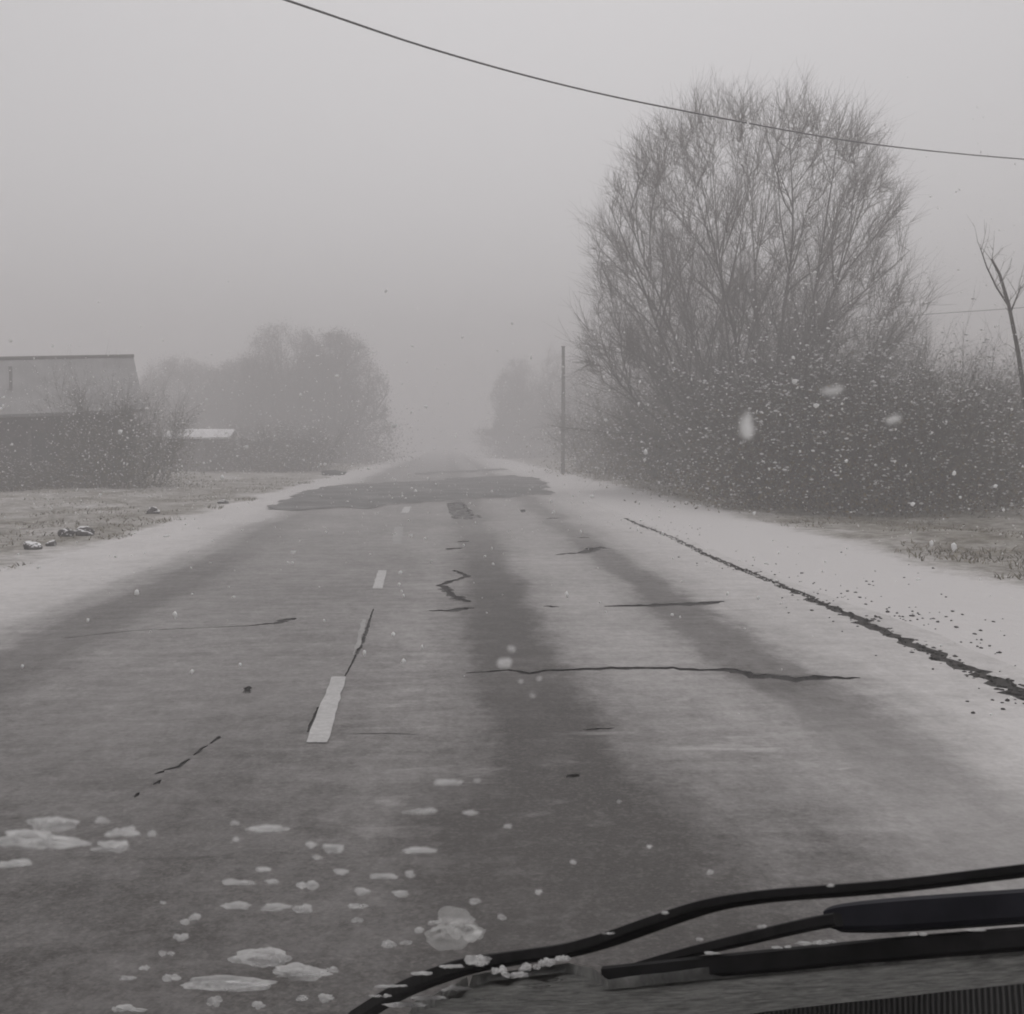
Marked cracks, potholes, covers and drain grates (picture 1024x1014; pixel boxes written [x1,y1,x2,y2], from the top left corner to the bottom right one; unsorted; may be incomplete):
crack [629,520,1024,701]
crack [134,736,221,797]
crack [548,518,607,555]
crack [428,541,471,612]
crack [469,667,859,683]
crack [94,618,296,635]
